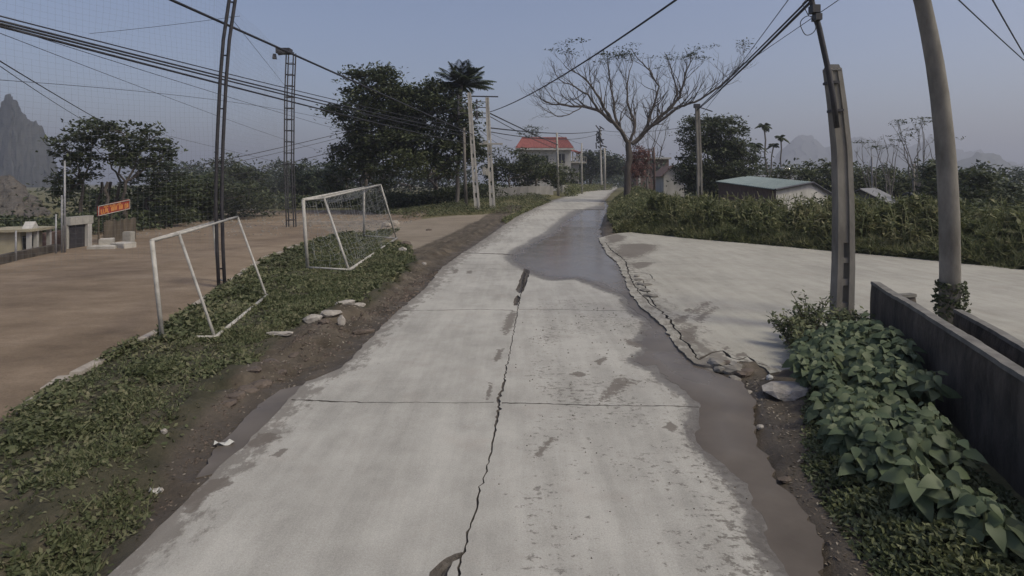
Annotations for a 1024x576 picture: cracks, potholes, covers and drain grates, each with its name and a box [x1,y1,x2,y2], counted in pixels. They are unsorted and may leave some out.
crack [457,253,527,576]
crack [605,242,767,366]
